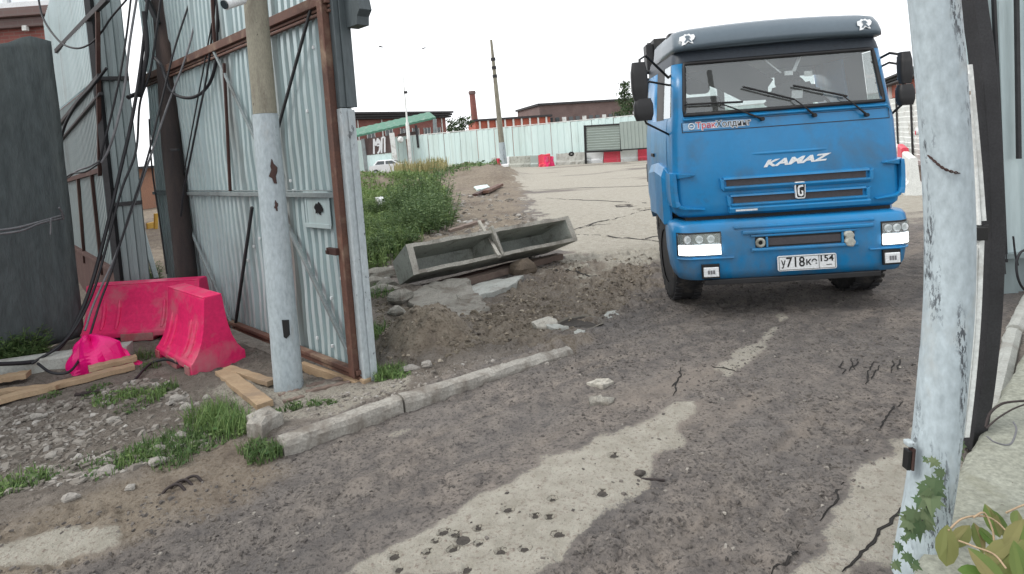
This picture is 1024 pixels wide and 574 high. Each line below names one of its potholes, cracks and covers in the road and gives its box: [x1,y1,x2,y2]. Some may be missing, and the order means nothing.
crack [838,358,916,384]
crack [820,482,901,572]
crack [880,401,903,428]
crack [547,185,657,241]
